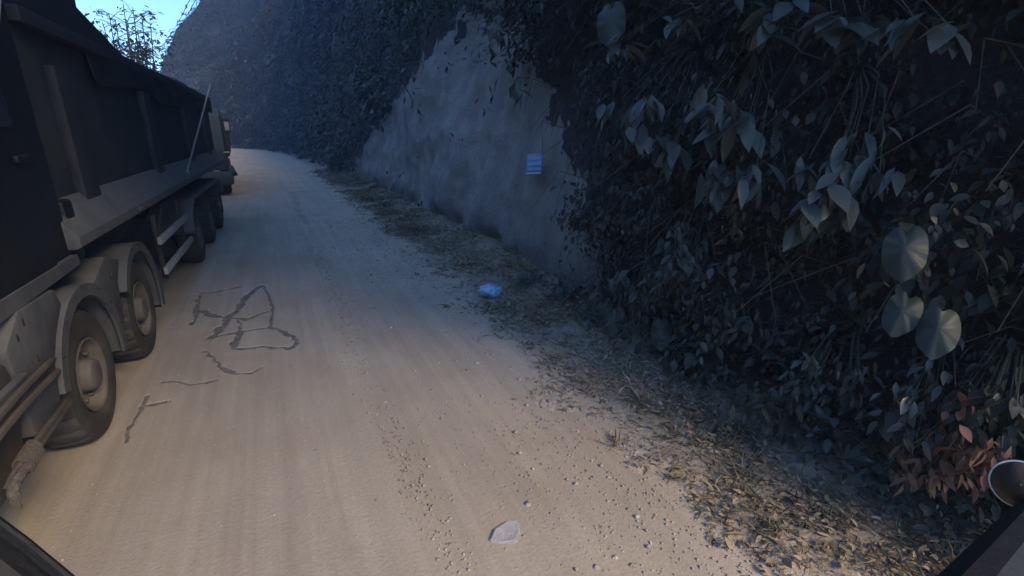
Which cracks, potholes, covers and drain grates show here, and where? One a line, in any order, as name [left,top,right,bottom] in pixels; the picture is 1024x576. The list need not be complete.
crack [124,285,300,443]
